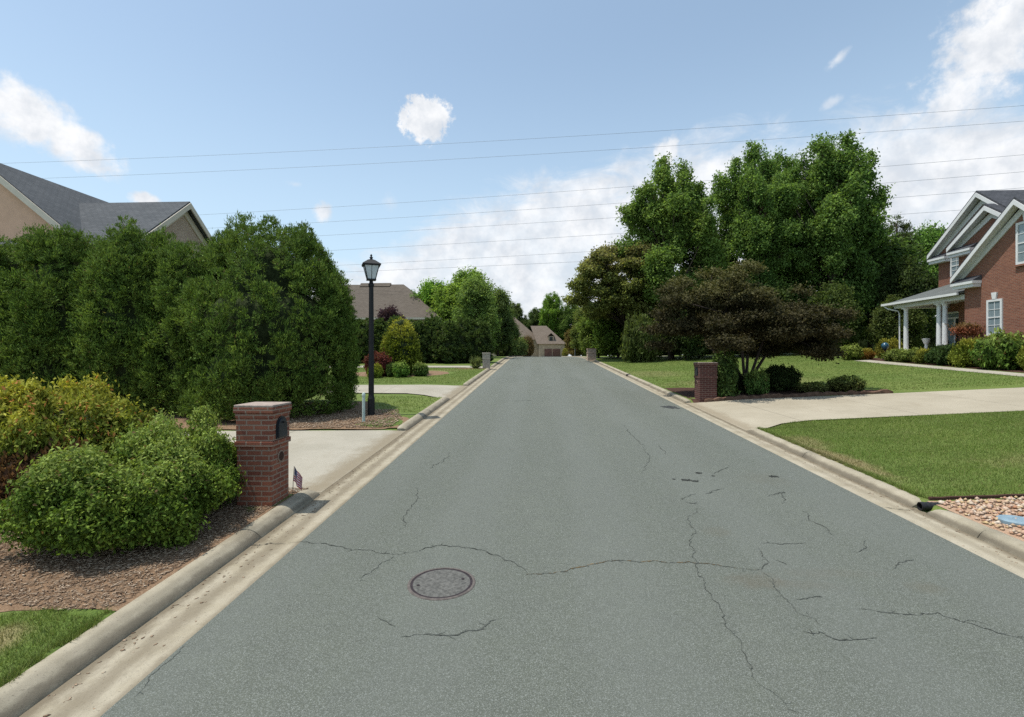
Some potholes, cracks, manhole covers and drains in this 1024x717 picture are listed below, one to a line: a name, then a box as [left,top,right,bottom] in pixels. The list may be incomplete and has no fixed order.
crack [859,608,1022,637]
manhole cover [407,567,476,600]
crack [251,502,876,713]
